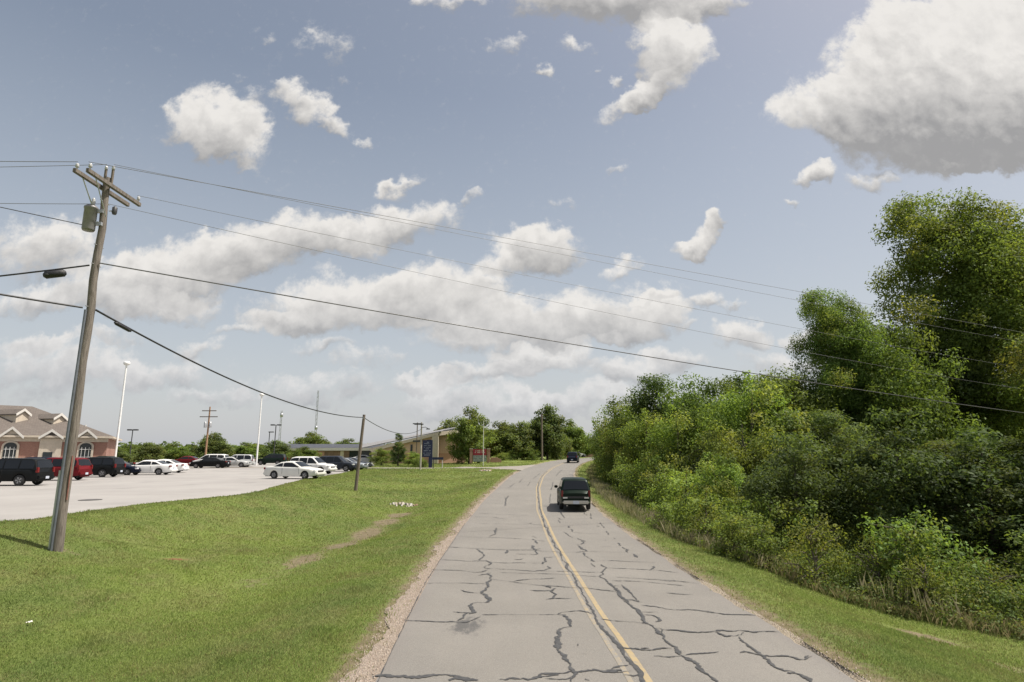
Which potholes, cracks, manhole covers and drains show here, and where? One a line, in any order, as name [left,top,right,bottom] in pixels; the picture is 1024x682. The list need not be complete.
crack [372,473,813,682]
